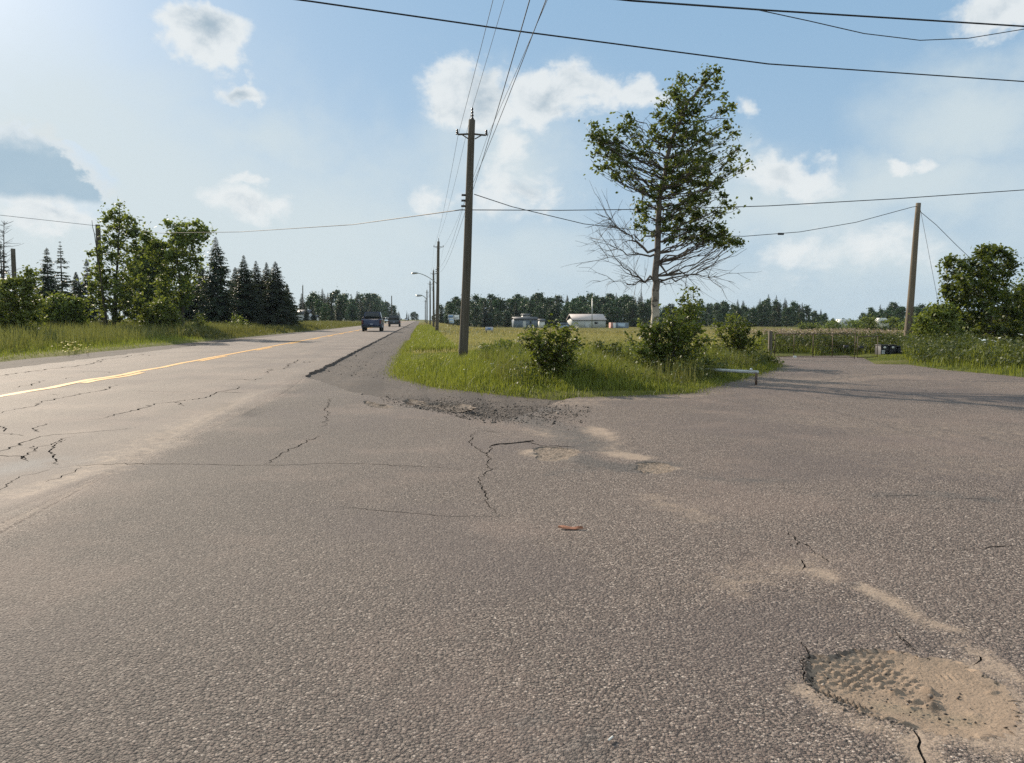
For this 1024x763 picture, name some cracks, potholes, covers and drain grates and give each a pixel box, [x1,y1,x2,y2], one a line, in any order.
pothole [800,647,1024,742]
crack [0,355,315,490]
pothole [402,398,476,413]
crack [352,431,575,517]
crack [87,399,457,470]
